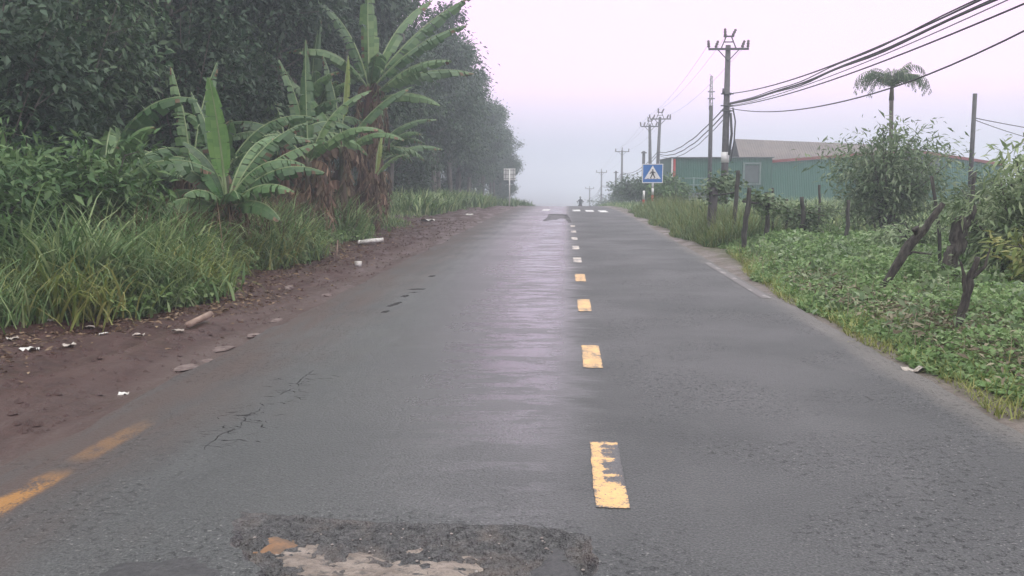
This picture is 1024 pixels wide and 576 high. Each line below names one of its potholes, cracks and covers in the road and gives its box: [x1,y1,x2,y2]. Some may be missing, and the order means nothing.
crack [203,374,322,448]
pothole [230,511,599,576]
